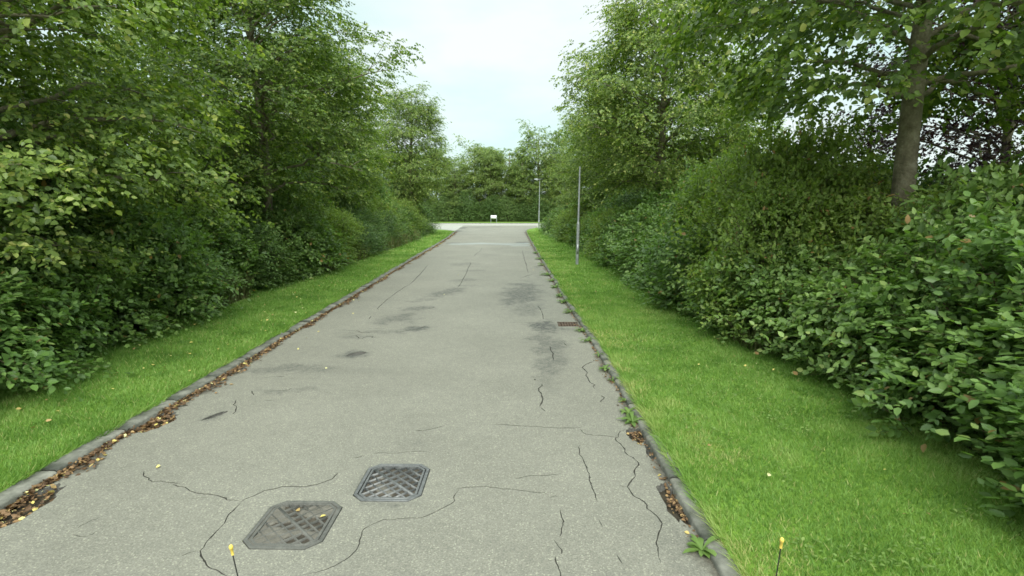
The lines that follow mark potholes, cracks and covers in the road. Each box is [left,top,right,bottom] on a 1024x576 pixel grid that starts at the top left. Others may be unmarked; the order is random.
crack [143,472,338,576]
crack [496,379,663,563]
crack [302,474,557,576]
